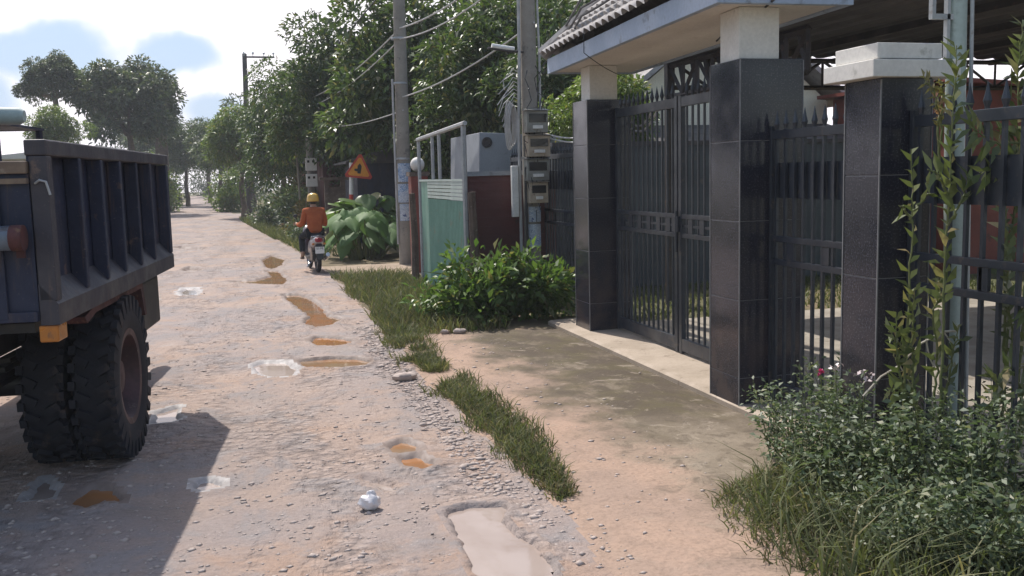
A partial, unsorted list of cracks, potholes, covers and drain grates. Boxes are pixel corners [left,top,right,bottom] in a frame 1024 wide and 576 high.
pothole [174,287,203,296]
pothole [434,499,565,576]
pothole [380,436,429,454]
pothole [186,475,230,493]
pothole [146,404,187,425]
pothole [258,254,289,270]
pothole [219,269,292,285]
pothole [293,355,375,368]
pothole [248,359,304,378]
pothole [16,474,65,503]
pothole [59,482,131,510]
pothole [389,450,443,470]
